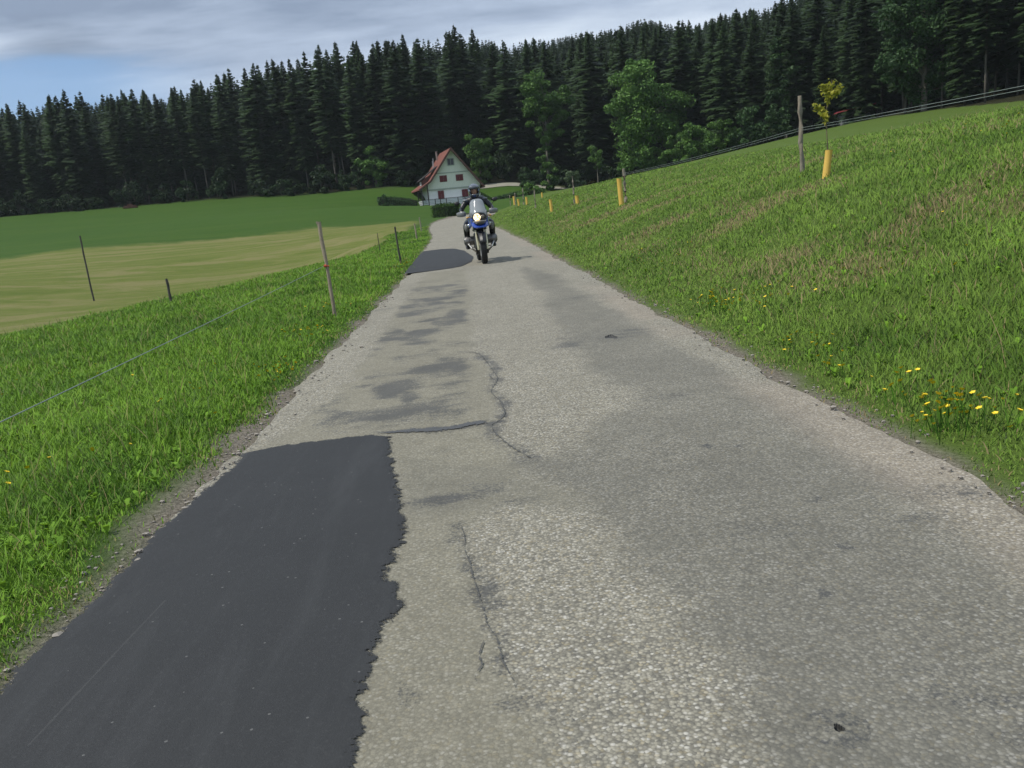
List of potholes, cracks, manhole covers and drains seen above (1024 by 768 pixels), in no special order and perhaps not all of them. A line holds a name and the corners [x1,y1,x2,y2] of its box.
crack [469,351,532,458]
crack [460,523,516,687]
